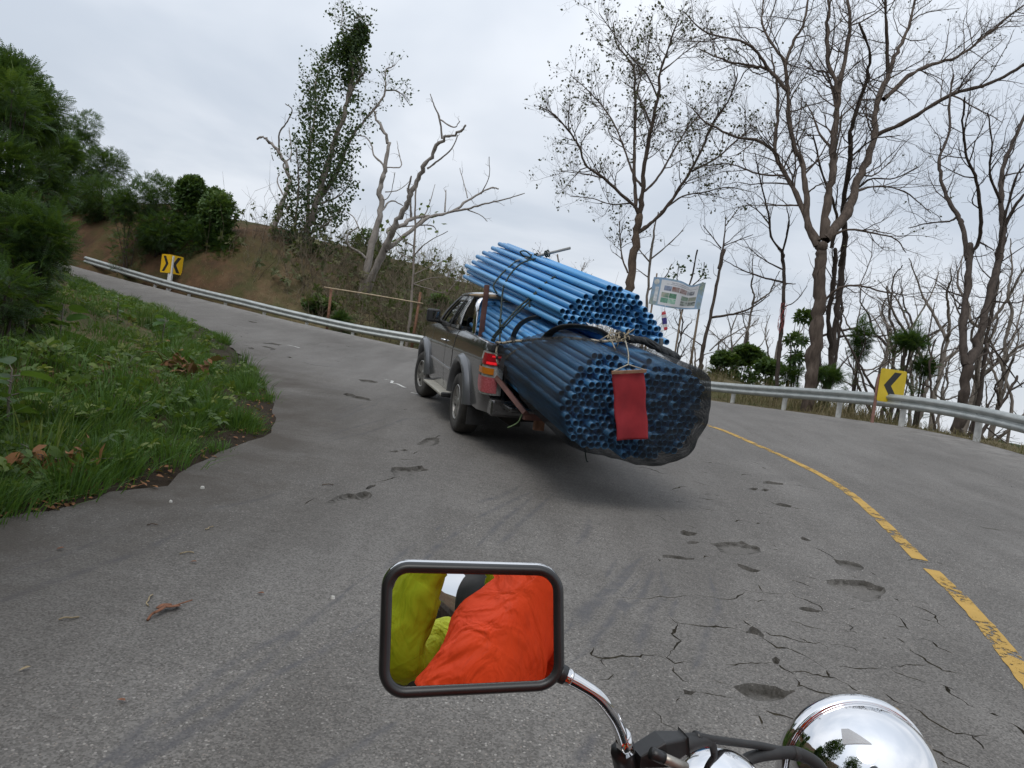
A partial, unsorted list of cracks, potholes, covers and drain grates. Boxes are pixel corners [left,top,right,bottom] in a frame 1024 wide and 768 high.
crack [590,576,984,768]
pothole [733,683,795,702]
pothole [826,579,886,602]
pothole [391,466,428,475]
pothole [709,541,761,555]
pothole [326,491,372,504]
pothole [417,437,440,446]
pothole [834,559,864,571]
